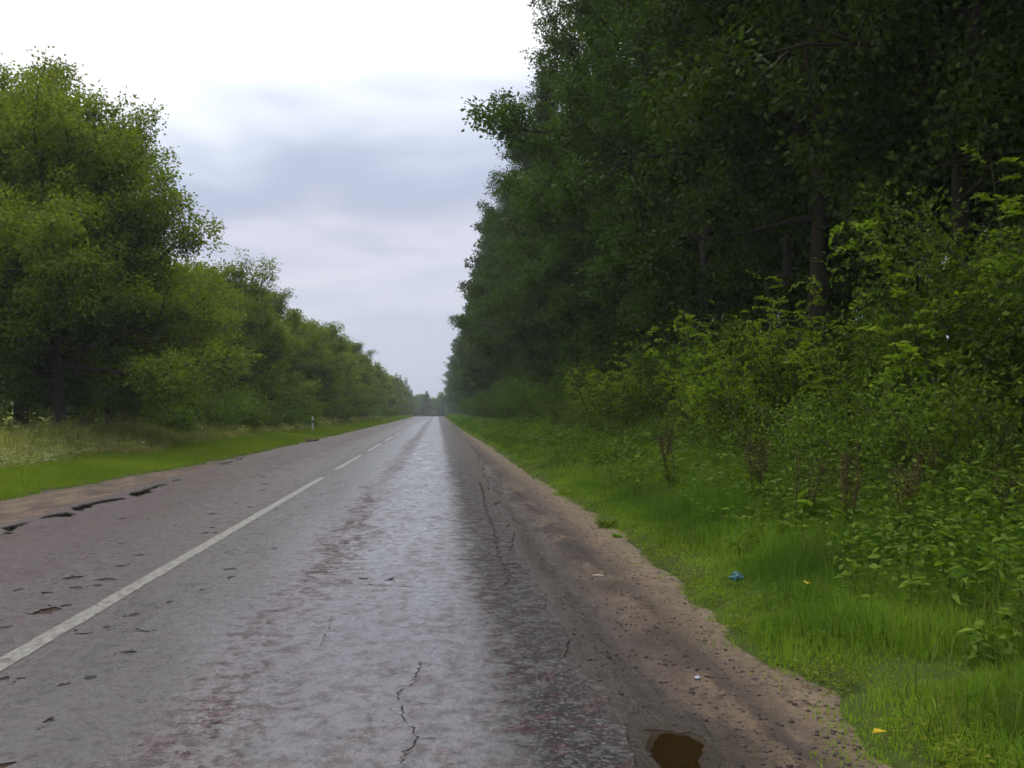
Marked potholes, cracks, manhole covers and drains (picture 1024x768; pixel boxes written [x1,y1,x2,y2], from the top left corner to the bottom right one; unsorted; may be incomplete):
pothole [645,729,707,768]
crack [478,482,522,586]
pothole [1,522,29,535]
crack [383,662,439,768]
pothole [71,497,125,511]
pothole [31,606,61,615]
pothole [129,483,167,497]
